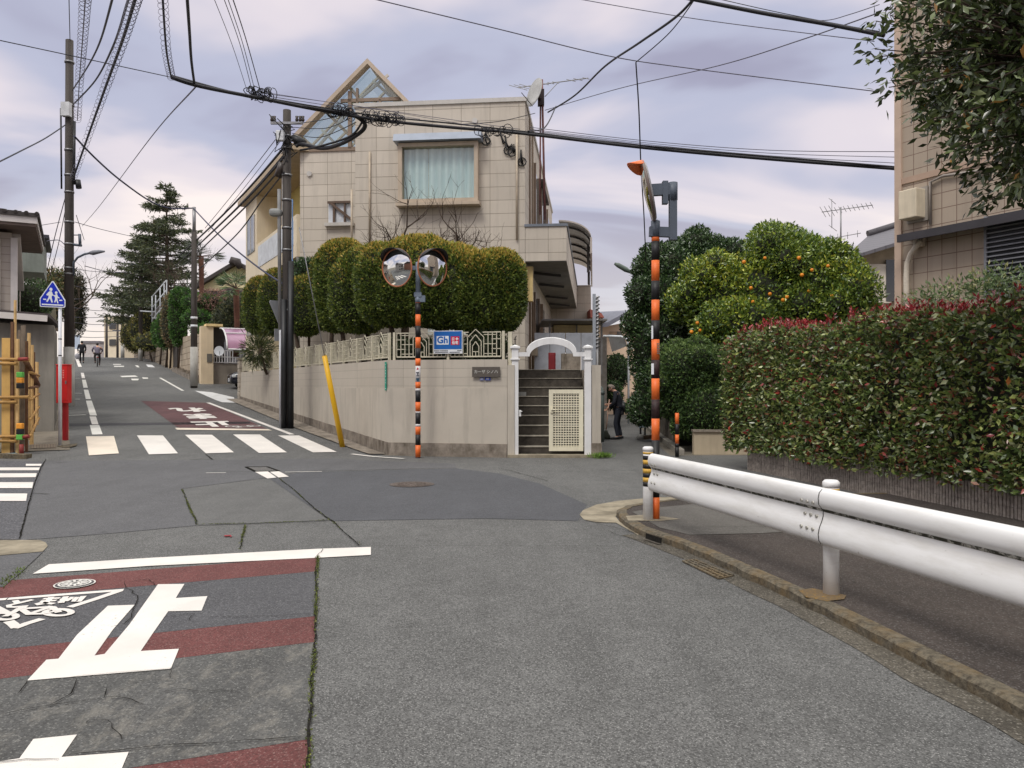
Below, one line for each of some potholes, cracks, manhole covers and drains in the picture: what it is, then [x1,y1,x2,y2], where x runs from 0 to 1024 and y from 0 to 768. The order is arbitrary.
crack [181,480,361,550]
drain grate [645,533,662,544]
manhole cover [53,579,96,588]
drain grate [682,559,734,579]
